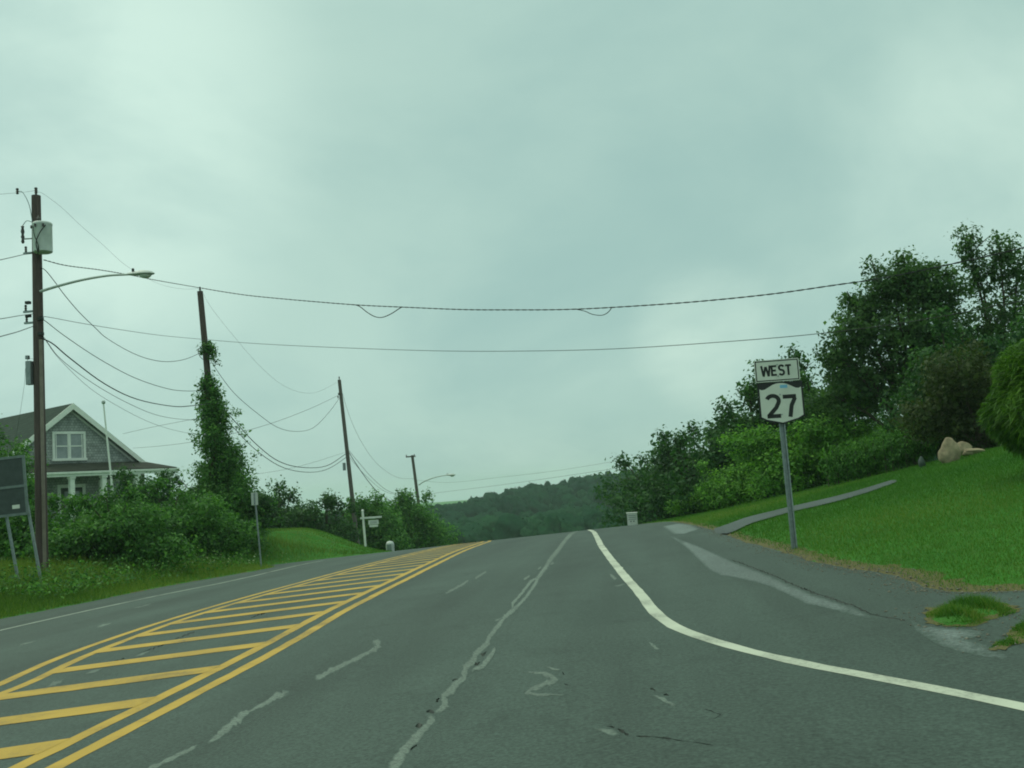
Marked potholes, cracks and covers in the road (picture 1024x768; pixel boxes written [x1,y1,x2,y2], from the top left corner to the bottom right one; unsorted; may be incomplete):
crack [593,726,713,746]
